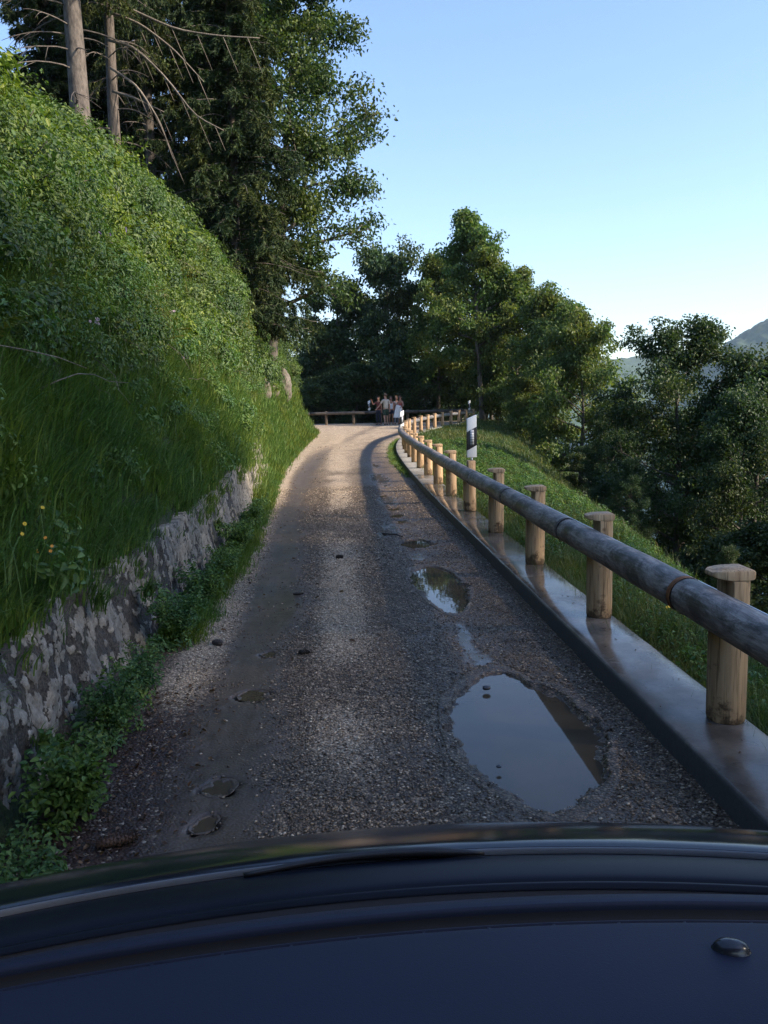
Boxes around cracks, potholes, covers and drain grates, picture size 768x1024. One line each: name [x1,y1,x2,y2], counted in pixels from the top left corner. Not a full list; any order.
pothole [201,778,239,798]
pothole [189,813,220,835]
pothole [236,690,270,703]
pothole [437,665,621,822]
pothole [395,537,436,550]
pothole [405,564,474,617]
pothole [260,650,281,658]
